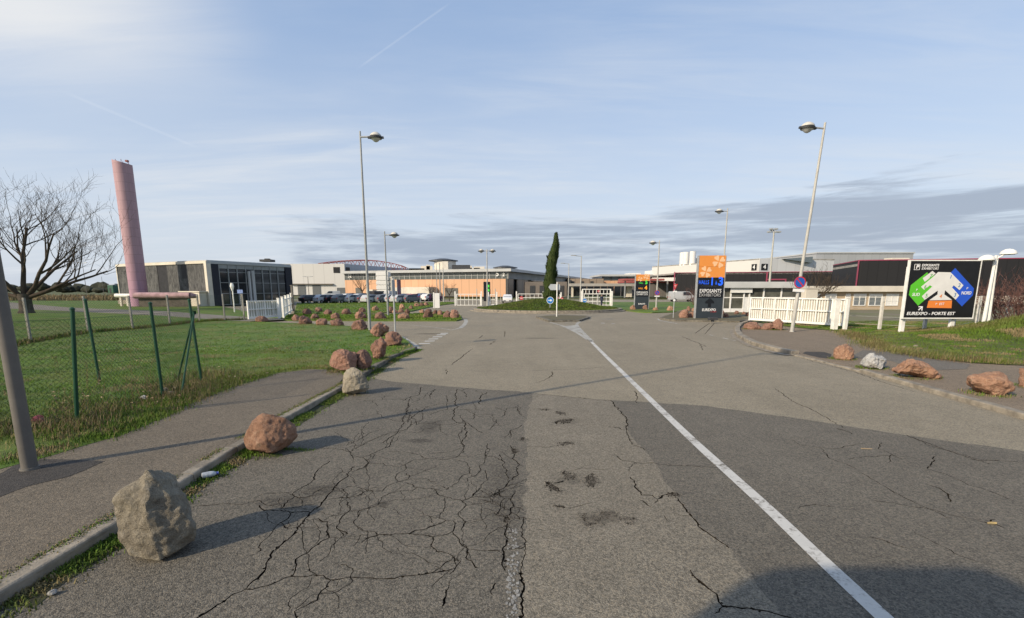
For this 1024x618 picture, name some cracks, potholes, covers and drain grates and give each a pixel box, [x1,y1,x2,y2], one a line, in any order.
crack [778,390,1023,520]
crack [870,531,983,563]
crack [690,570,792,618]
crack [193,388,527,618]
